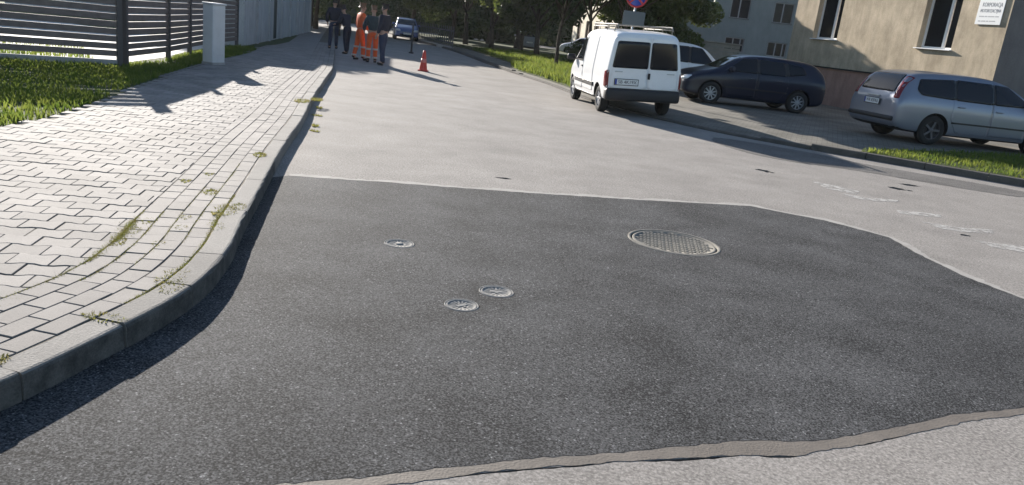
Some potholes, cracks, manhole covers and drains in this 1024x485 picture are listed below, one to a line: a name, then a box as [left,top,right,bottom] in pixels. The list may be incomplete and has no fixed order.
utility cover [444,298,479,312]
manhole cover [627,229,721,256]
utility cover [479,285,514,298]
utility cover [384,239,415,248]
